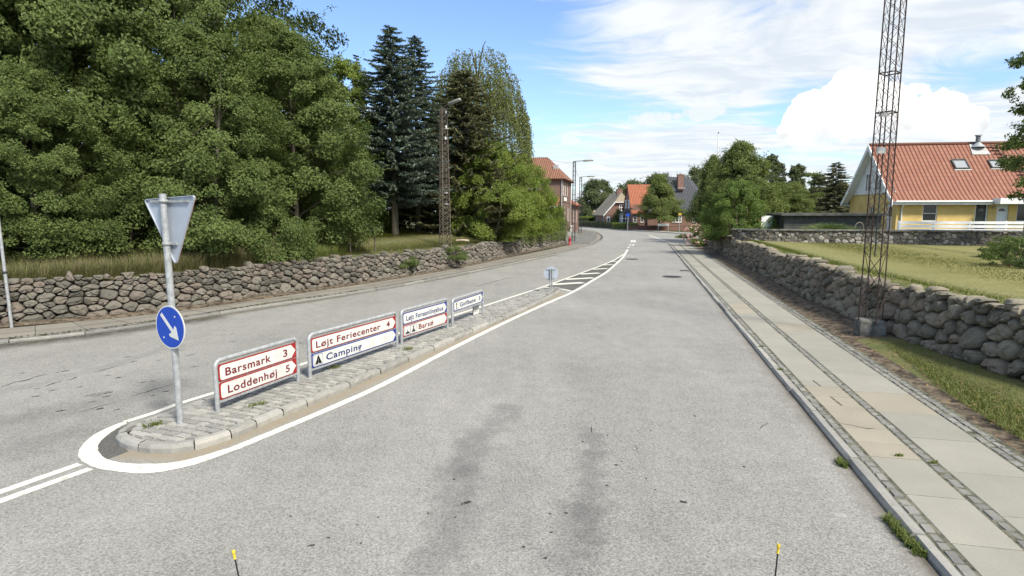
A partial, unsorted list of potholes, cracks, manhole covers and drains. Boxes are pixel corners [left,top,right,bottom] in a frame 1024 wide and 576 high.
crack [2,361,137,387]
